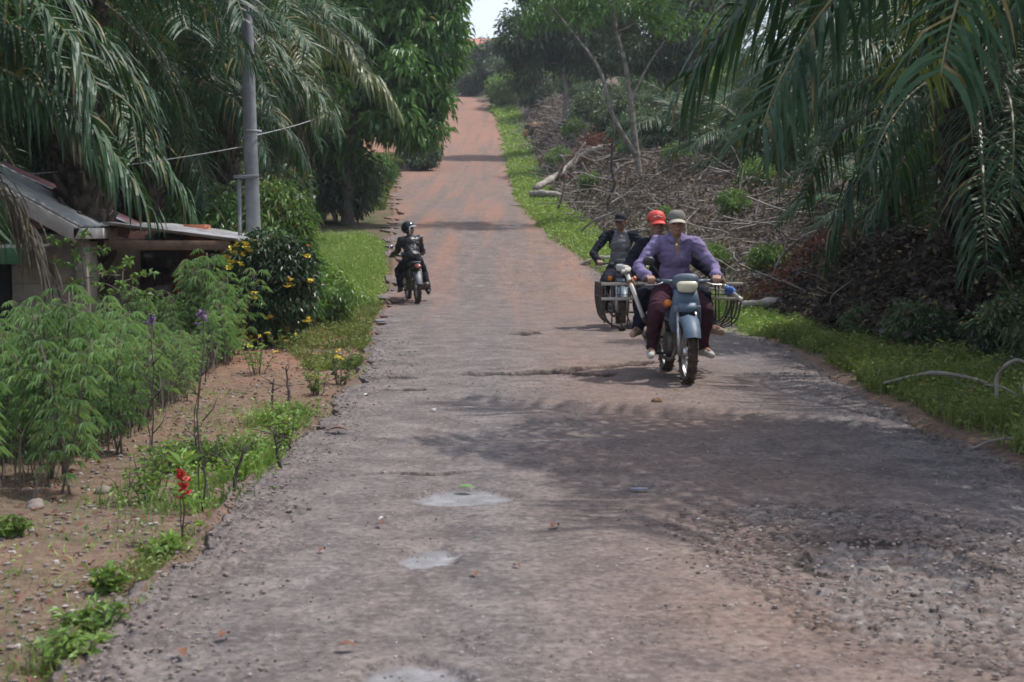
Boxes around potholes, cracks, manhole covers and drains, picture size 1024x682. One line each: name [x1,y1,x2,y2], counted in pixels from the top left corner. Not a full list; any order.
crack [457,360,660,377]
pothole [786,534,1023,604]
